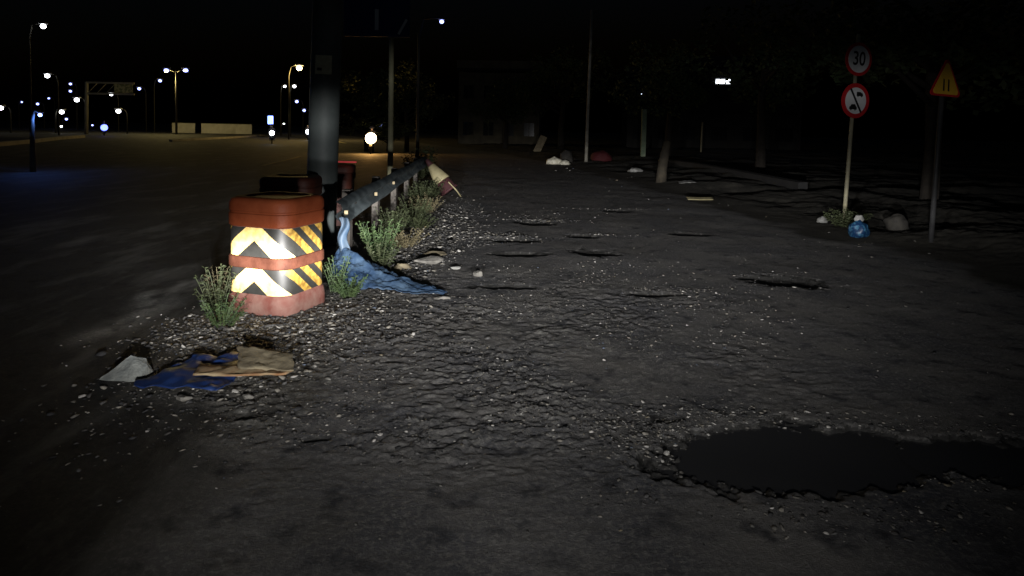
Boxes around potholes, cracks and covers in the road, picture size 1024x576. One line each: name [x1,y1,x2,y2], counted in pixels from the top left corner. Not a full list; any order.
pothole [736,274,835,291]
pothole [897,433,1024,490]
pothole [566,247,622,258]
